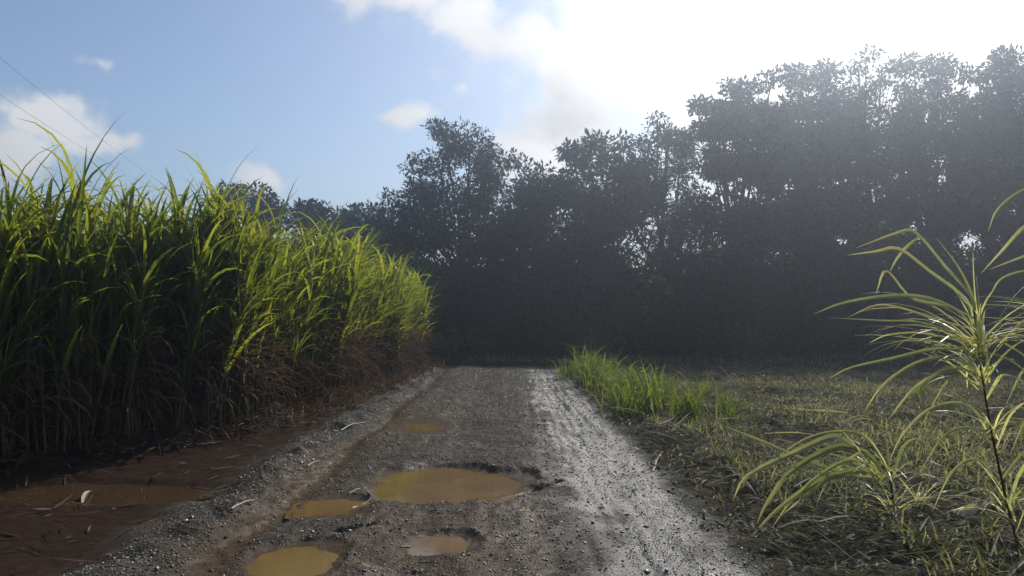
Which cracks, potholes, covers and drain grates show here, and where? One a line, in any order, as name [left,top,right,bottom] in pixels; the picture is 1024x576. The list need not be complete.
pothole [379,415,460,438]
pothole [396,527,486,557]
pothole [236,534,356,576]
pothole [281,492,375,522]
pothole [352,461,570,509]
